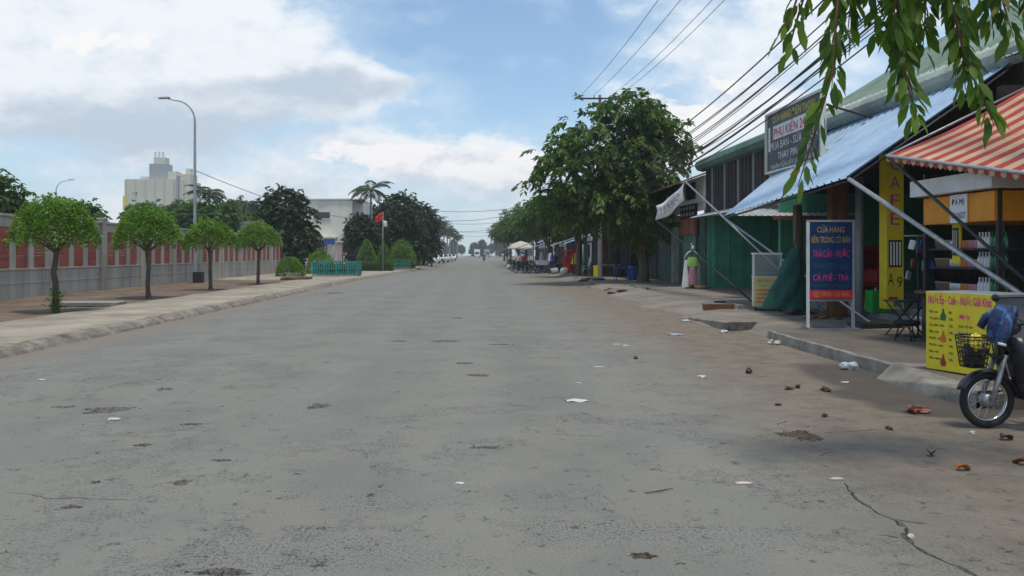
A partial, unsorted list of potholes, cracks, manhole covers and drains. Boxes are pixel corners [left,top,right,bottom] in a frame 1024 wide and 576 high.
crack [844,483,977,576]
pothole [184,567,254,576]
crack [6,492,158,500]
